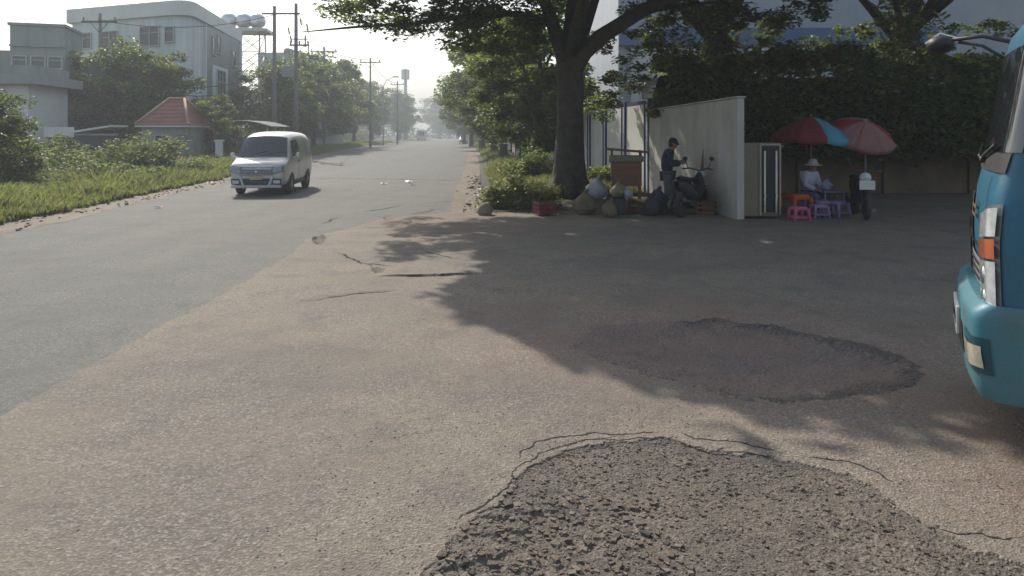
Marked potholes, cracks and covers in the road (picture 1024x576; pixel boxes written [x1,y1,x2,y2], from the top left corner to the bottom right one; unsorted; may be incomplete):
pothole [419,436,1024,576]
pothole [312,235,325,245]
crack [455,432,653,520]
crack [311,250,470,302]
crack [805,456,896,485]
crack [938,528,1018,540]
crack [673,433,783,458]
